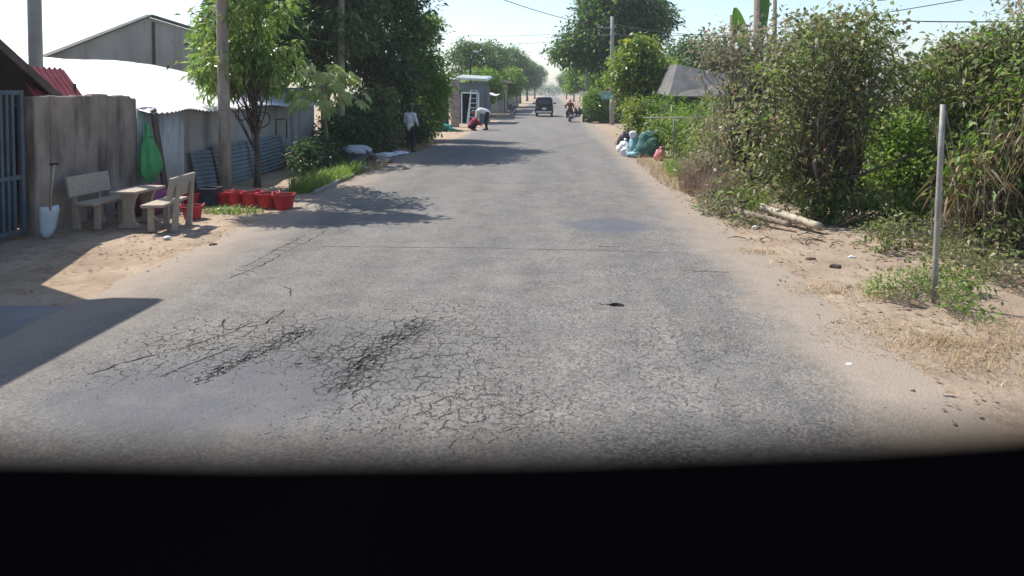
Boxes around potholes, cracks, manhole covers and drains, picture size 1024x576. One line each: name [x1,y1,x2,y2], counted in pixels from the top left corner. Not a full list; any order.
crack [229,229,668,279]
